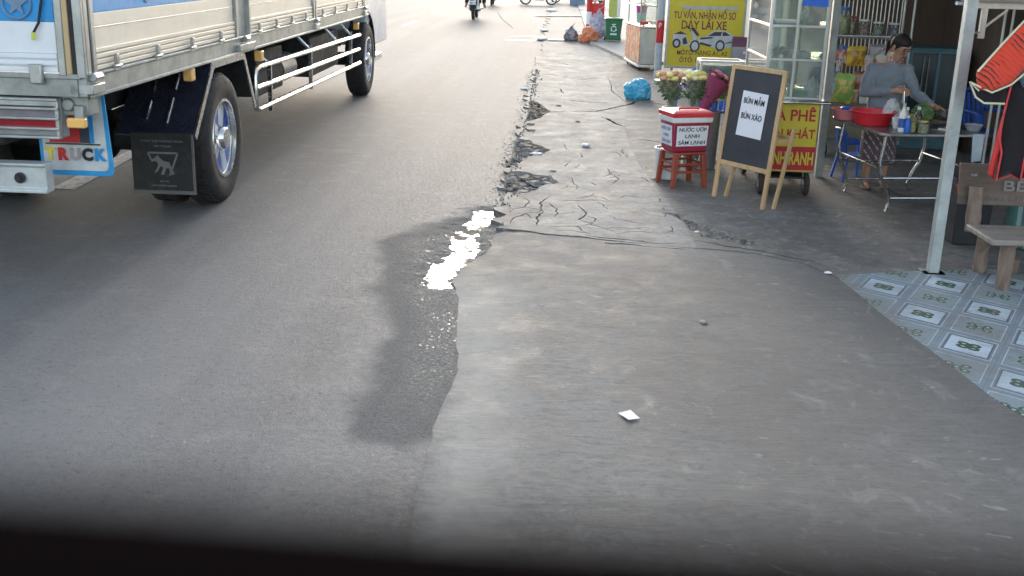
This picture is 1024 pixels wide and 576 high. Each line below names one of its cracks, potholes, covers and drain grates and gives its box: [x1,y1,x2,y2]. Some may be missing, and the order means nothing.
crack [502,146,673,233]
pothole [525,101,551,121]
pothole [504,171,559,195]
crack [555,77,683,126]
pothole [506,138,550,168]
